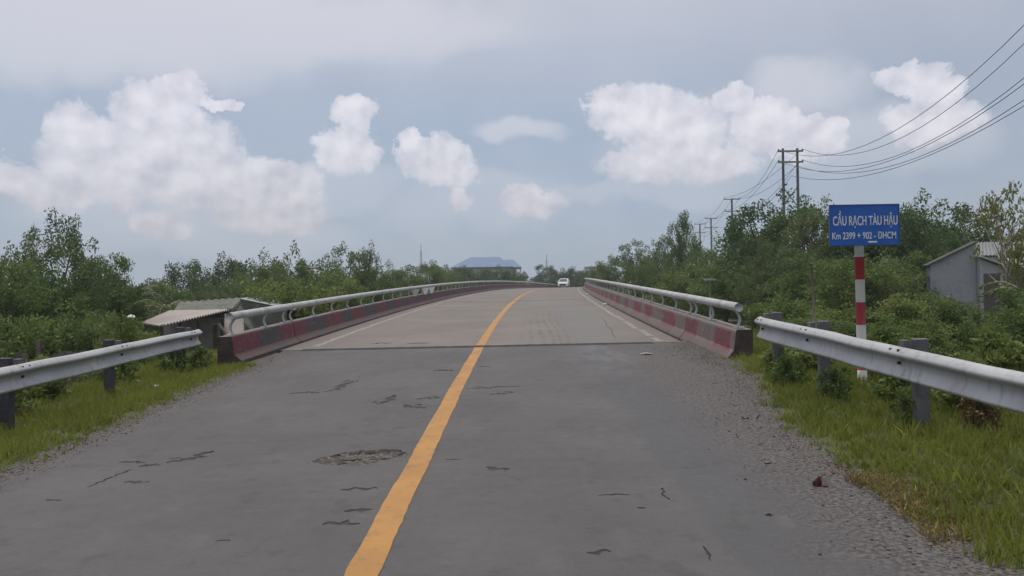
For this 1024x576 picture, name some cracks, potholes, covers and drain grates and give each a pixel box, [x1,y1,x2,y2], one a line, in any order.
pothole [306,449,408,466]
crack [371,395,439,408]
crack [88,451,214,487]
crack [438,370,517,395]
crack [322,508,372,525]
crack [290,380,358,394]
